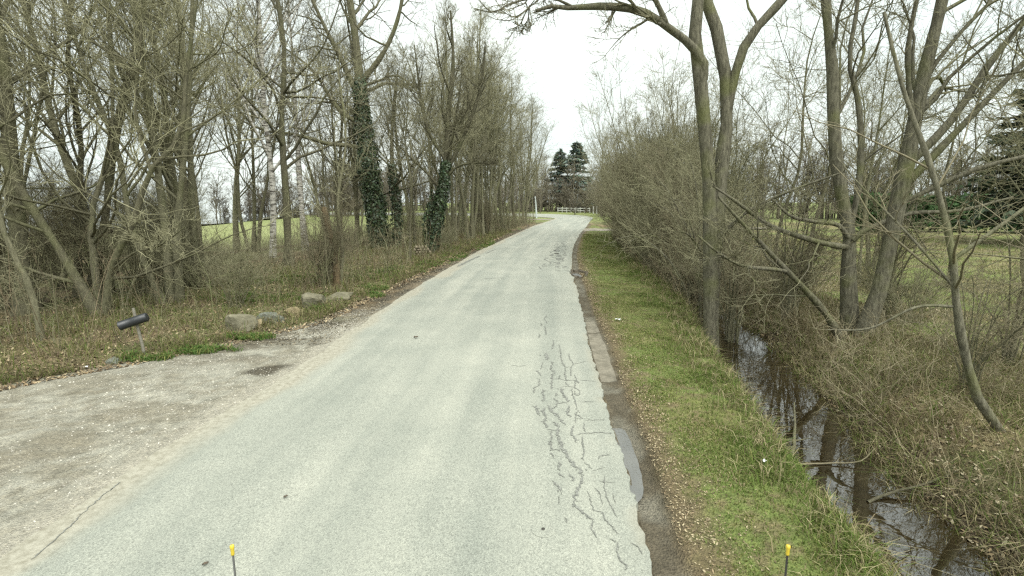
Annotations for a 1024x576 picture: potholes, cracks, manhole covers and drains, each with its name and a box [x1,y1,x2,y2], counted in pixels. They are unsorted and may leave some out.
crack [538,241,570,272]
crack [533,316,642,570]
crack [32,482,120,559]
